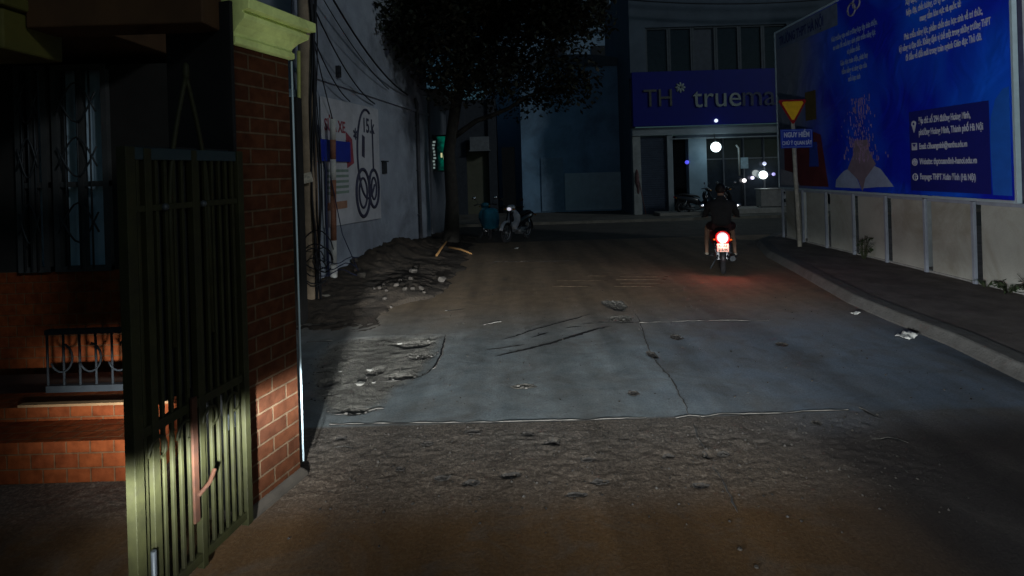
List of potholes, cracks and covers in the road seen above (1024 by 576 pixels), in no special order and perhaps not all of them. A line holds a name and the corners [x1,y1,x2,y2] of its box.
pothole [341,407,372,416]
pothole [389,340,436,349]
pothole [365,366,388,377]
crack [483,312,738,513]
pothole [407,352,434,361]
